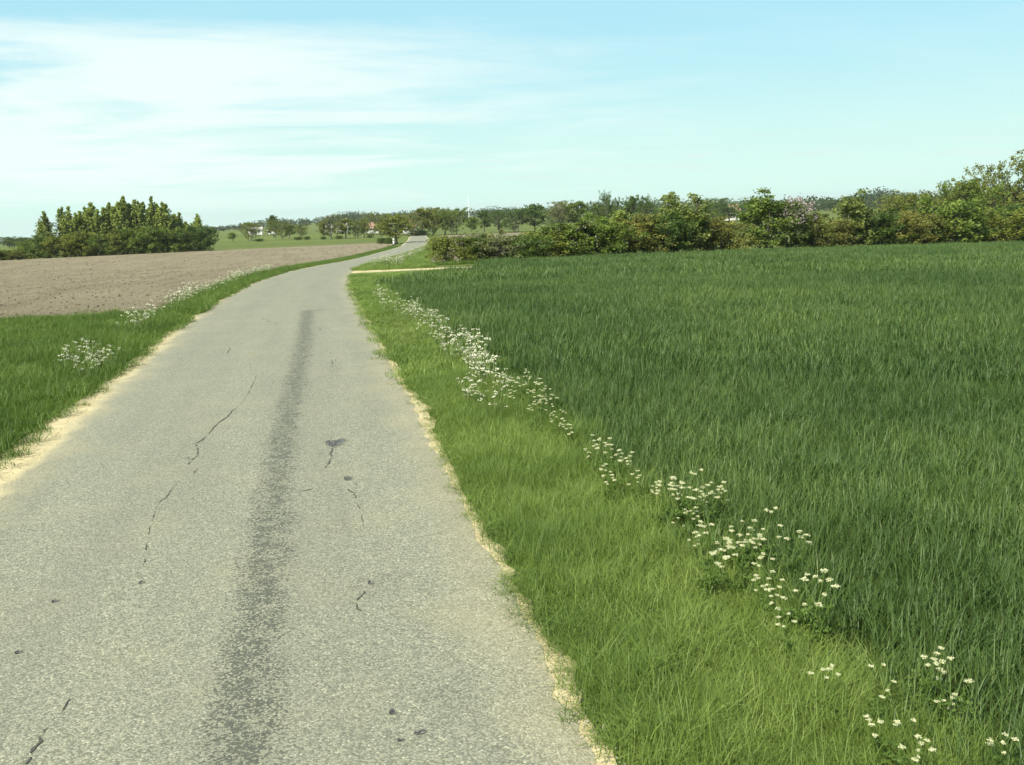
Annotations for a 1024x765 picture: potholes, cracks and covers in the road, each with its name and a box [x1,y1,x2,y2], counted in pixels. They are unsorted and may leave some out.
crack [24,727,48,764]
pothole [324,438,349,448]
crack [187,377,256,472]
